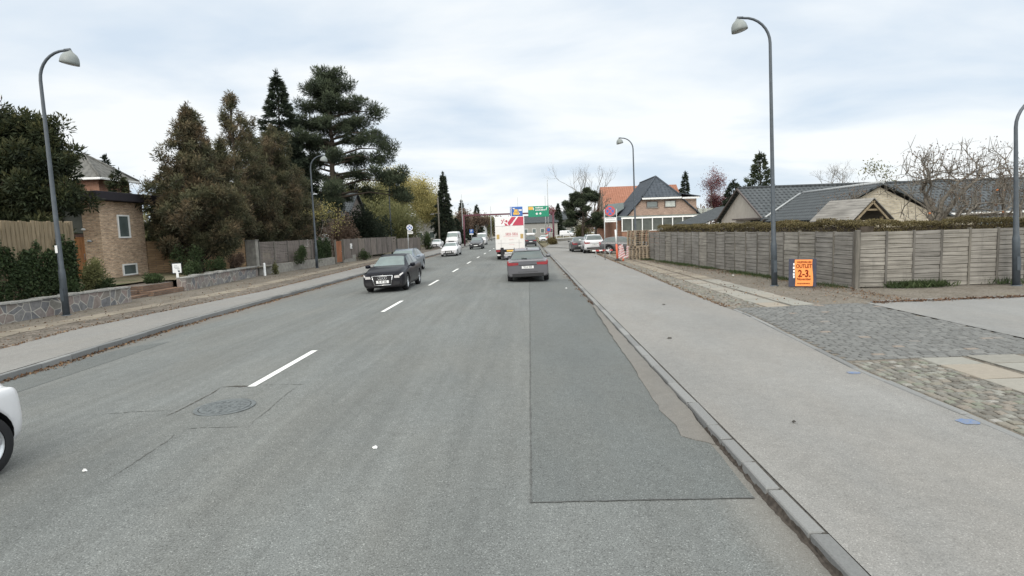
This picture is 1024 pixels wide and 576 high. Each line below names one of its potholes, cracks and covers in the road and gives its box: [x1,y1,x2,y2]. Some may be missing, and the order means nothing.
manhole cover [193,398,256,416]
